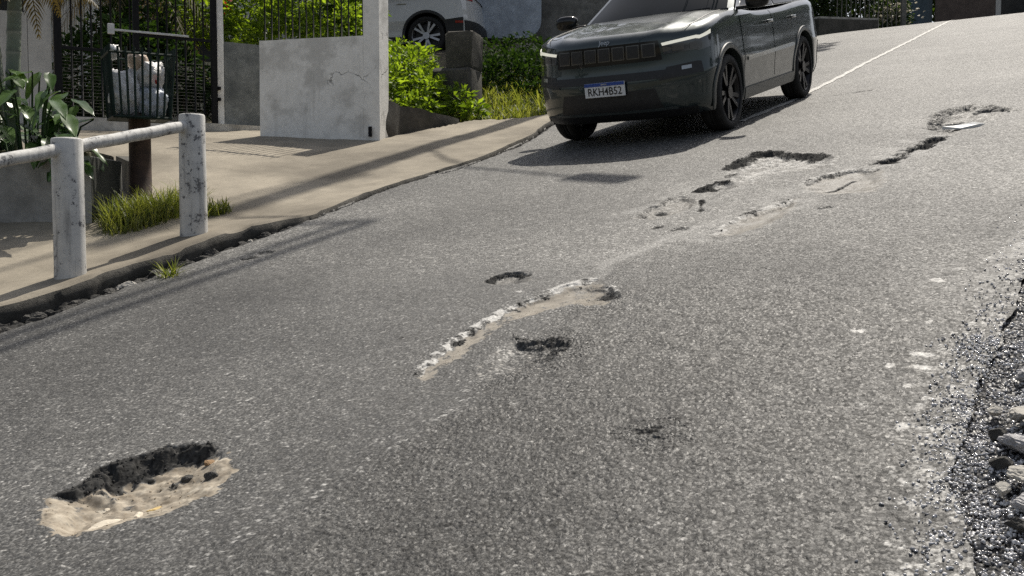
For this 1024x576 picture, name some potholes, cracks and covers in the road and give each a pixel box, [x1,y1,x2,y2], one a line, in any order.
pothole [632,222,678,232]
pothole [618,193,710,222]
pothole [708,148,853,187]
pothole [13,435,256,550]
pothole [472,268,546,289]
pothole [678,179,745,196]
pothole [914,102,1011,138]
pothole [397,274,629,388]
pothole [788,166,898,198]
